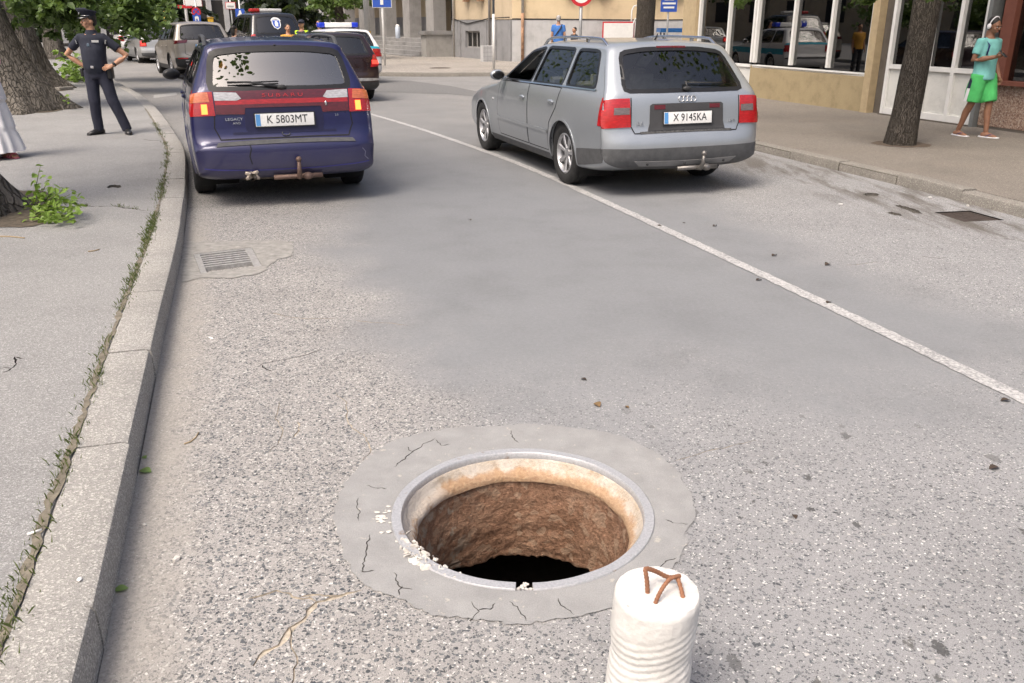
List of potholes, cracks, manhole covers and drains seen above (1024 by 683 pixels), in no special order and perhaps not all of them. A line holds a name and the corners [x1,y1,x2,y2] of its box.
drain grate [194,248,262,273]
crack [356,431,684,621]
manhole cover [298,423,696,625]
drain grate [935,211,1002,222]
crack [247,590,361,683]
